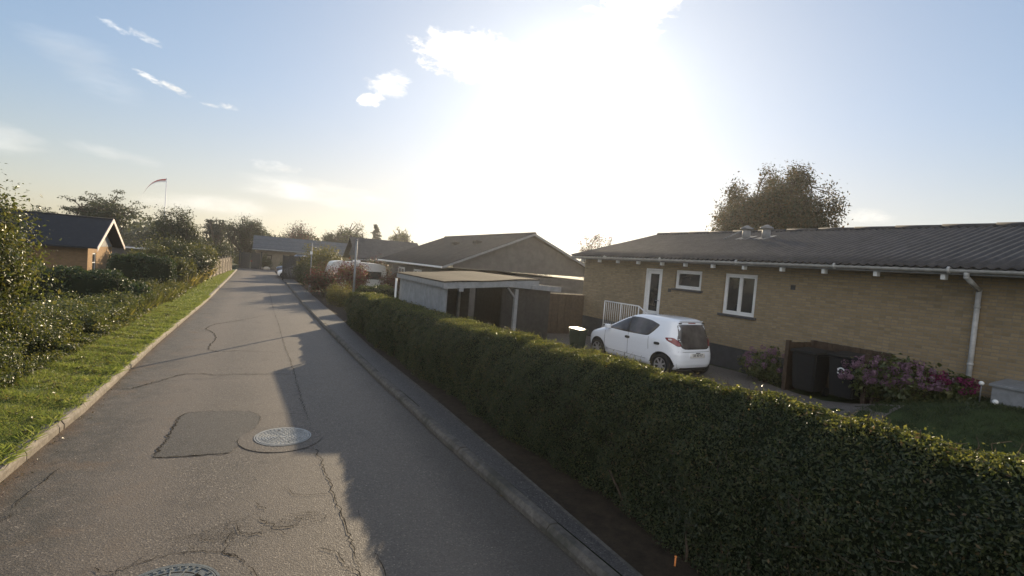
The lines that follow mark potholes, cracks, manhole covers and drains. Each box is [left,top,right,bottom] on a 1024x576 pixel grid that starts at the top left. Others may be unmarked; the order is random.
manhole cover [254,427,311,446]
manhole cover [138,563,220,576]
crack [93,490,346,576]
crack [317,548,386,576]
crack [0,460,66,521]
